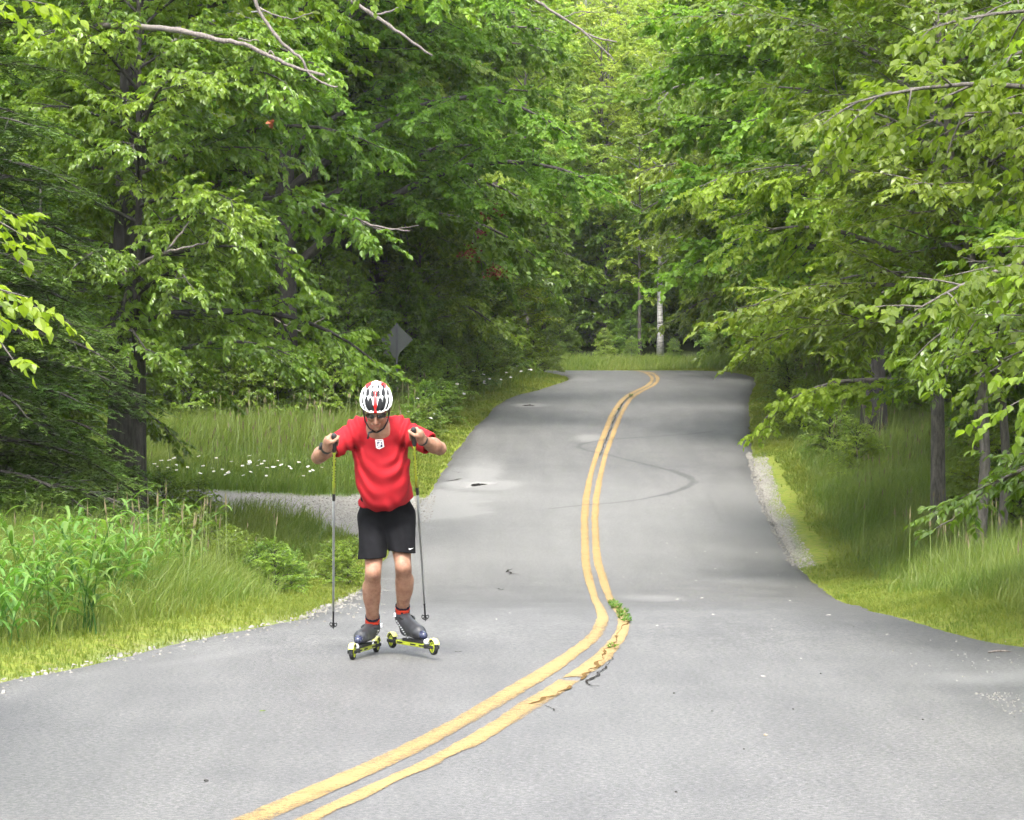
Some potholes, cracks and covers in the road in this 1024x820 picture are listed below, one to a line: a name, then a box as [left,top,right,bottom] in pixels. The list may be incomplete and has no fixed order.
crack [529,606,630,711]
